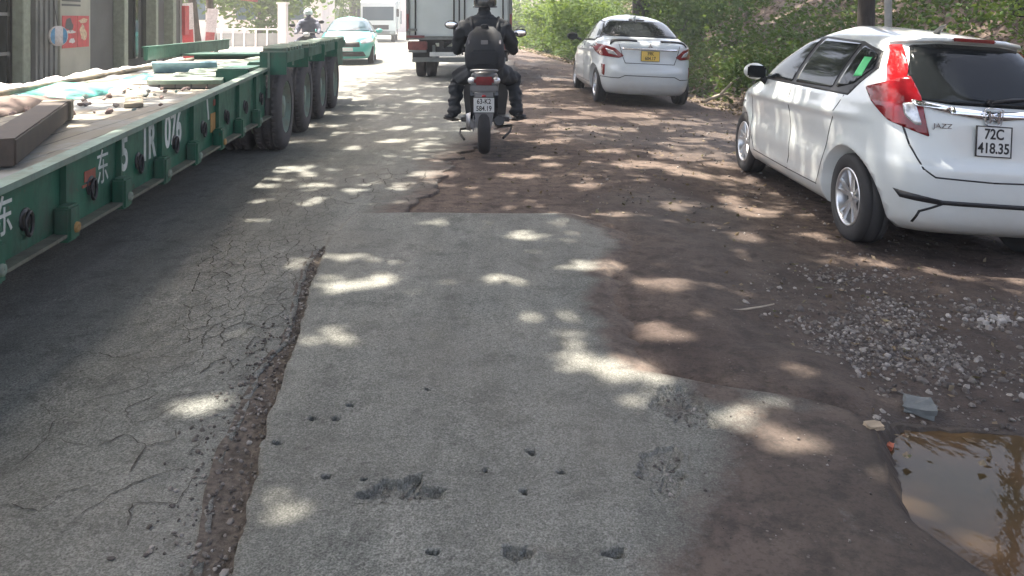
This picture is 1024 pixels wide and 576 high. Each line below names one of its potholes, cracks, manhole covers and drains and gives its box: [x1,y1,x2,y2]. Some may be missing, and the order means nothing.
pothole [875,422,1024,573]
pothole [638,381,728,438]
pothole [343,467,459,510]
pothole [623,441,700,507]
crack [11,176,342,576]
pothole [297,411,326,426]
pothole [488,537,549,574]
